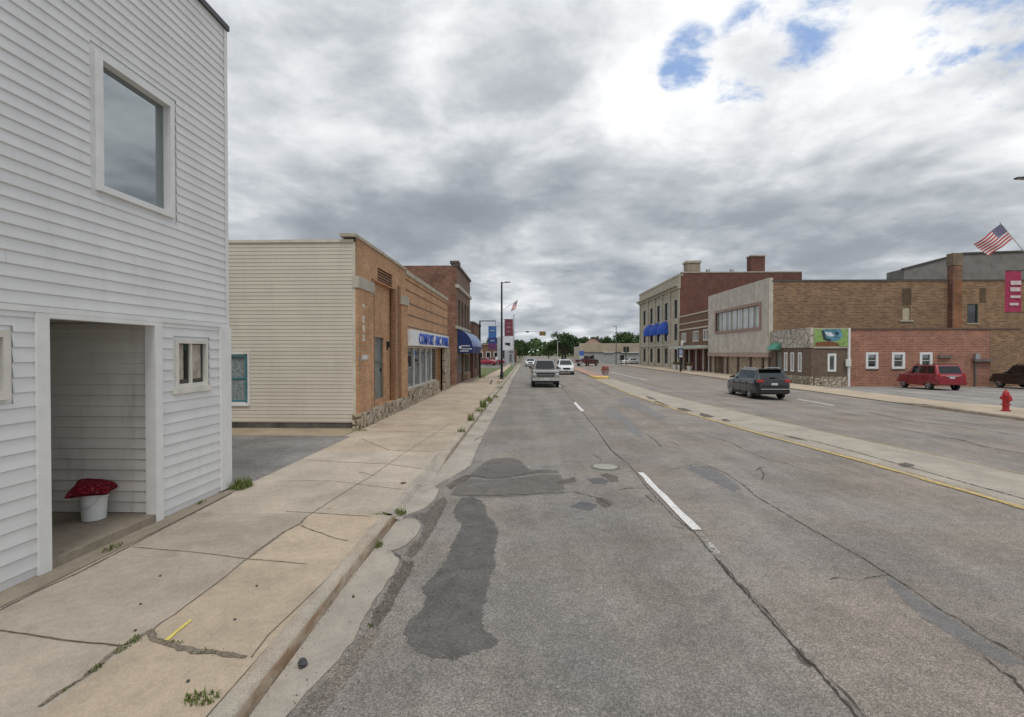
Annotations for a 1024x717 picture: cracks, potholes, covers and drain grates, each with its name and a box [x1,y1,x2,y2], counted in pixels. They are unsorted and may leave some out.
crack [814,665,866,717]
crack [705,438,1024,692]
